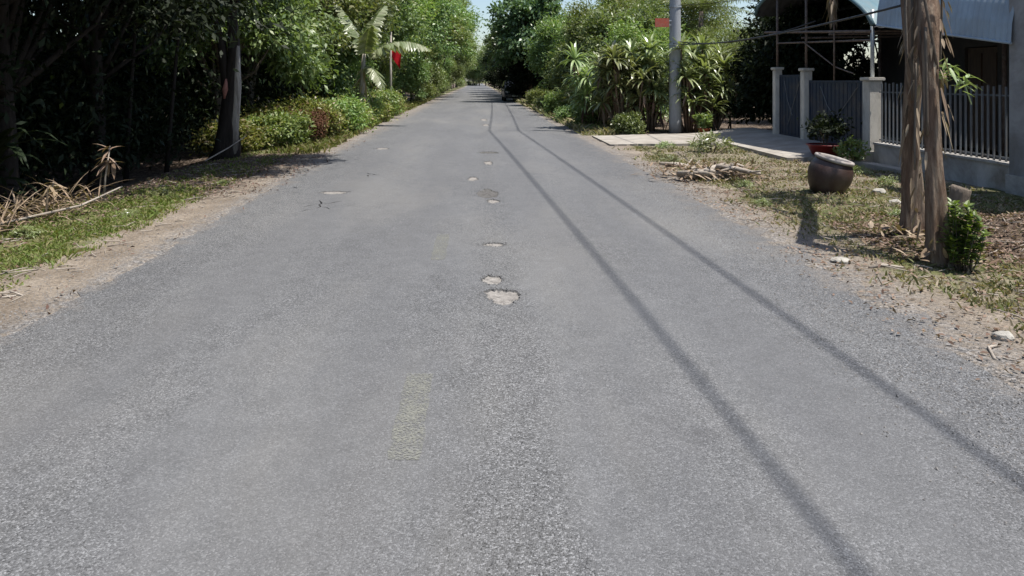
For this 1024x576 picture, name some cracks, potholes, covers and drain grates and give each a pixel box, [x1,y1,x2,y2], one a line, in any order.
pothole [479,287,527,307]
pothole [478,274,505,285]
